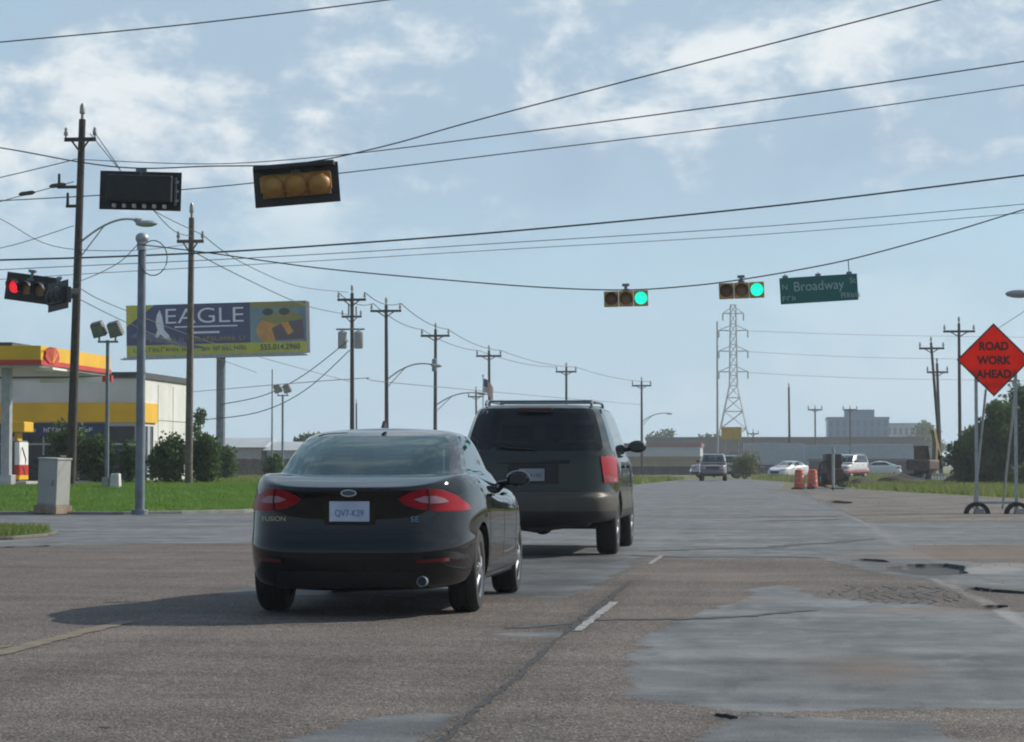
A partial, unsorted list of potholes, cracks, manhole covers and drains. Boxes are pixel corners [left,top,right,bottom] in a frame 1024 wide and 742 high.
pothole [883,563,969,576]
crack [435,580,1024,742]
crack [636,538,877,558]
